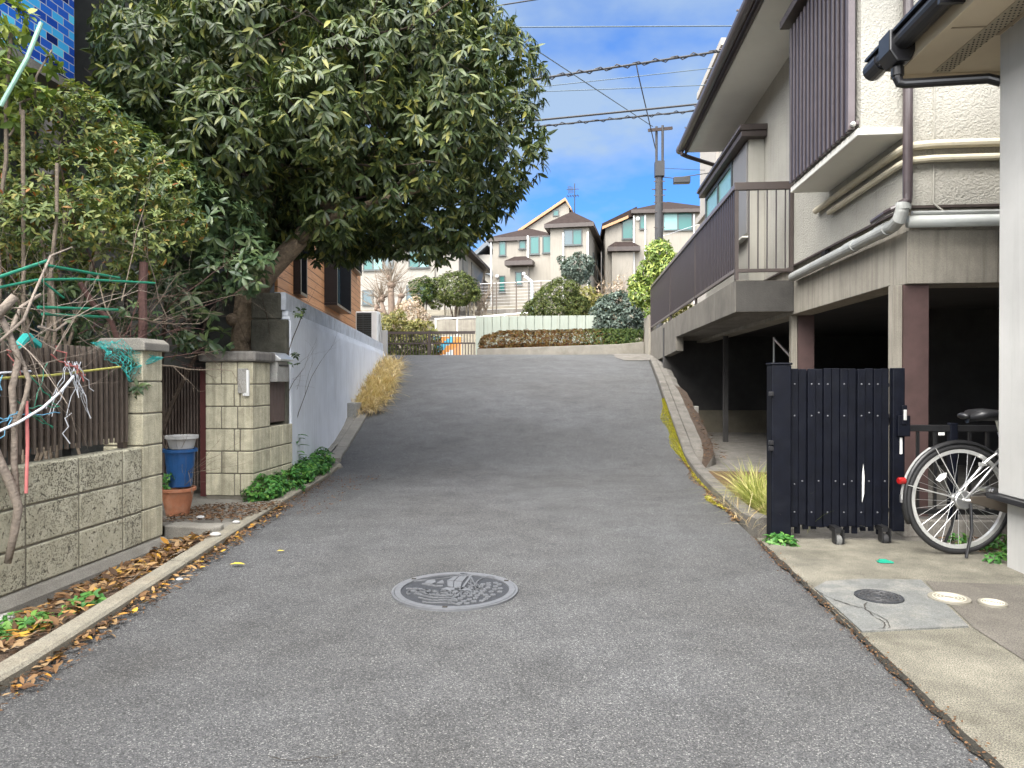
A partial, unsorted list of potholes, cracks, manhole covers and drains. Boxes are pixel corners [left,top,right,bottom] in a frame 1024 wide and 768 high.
crack [820,592,890,628]
manhole cover [391,572,518,612]
